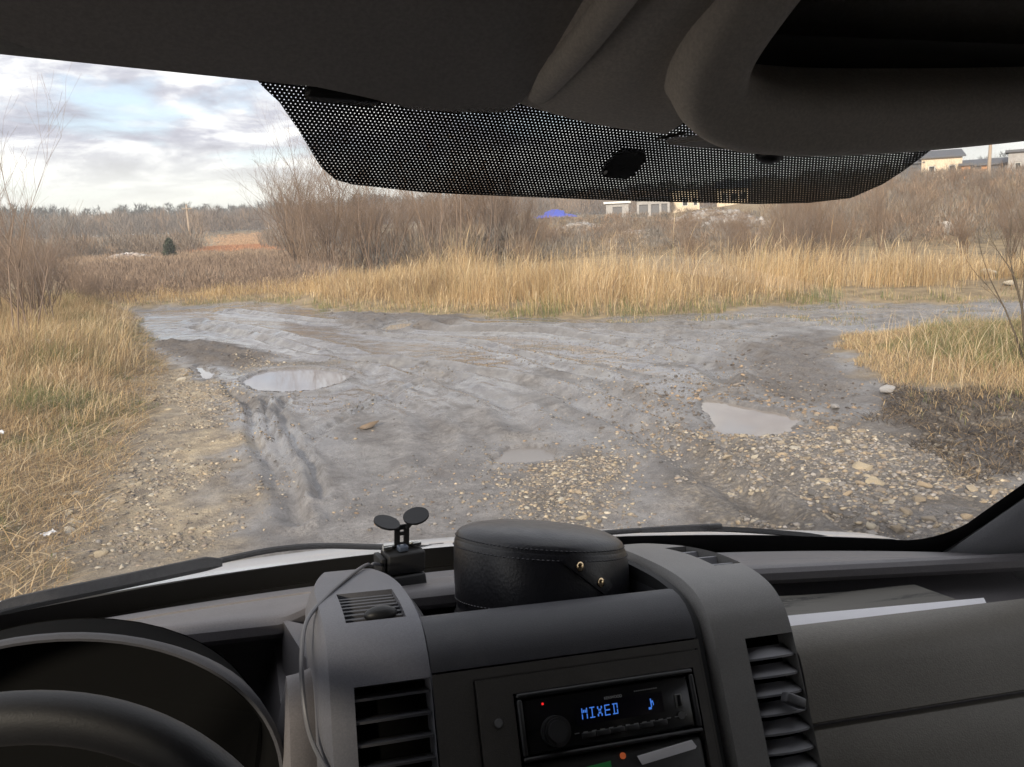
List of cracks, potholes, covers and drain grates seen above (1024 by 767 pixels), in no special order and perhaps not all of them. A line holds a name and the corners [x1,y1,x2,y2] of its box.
pothole [692,395,810,437]
pothole [490,444,566,465]
pothole [238,366,354,392]
pothole [188,364,221,381]
